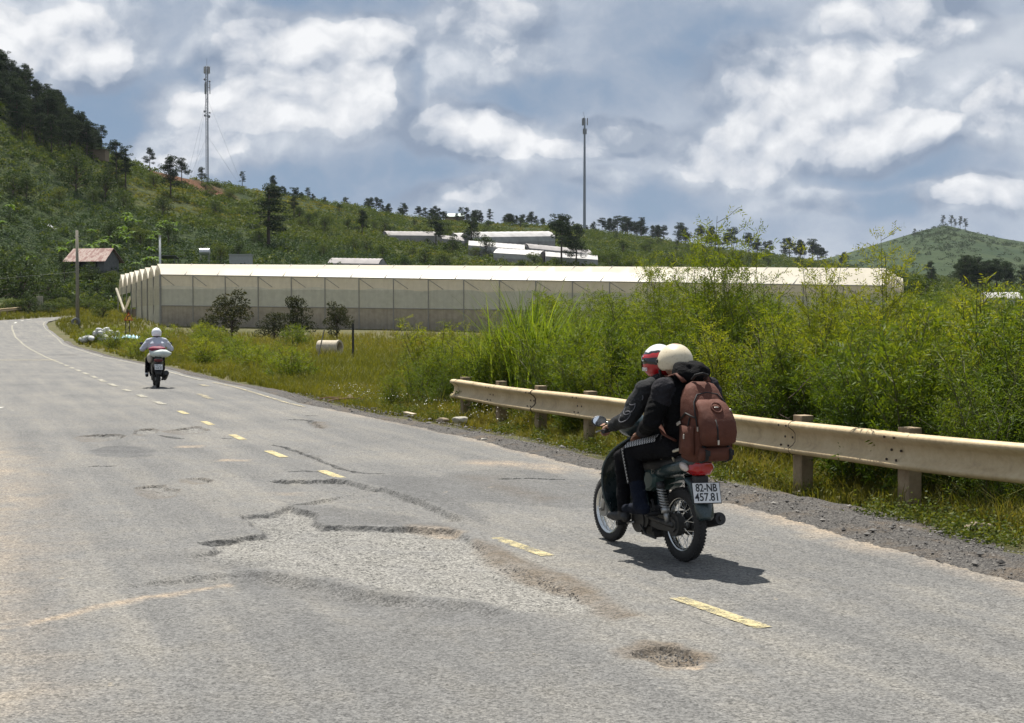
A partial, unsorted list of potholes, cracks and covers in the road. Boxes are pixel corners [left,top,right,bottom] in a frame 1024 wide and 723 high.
pothole [177,505,621,615]
crack [270,415,468,522]
pothole [631,644,710,667]
